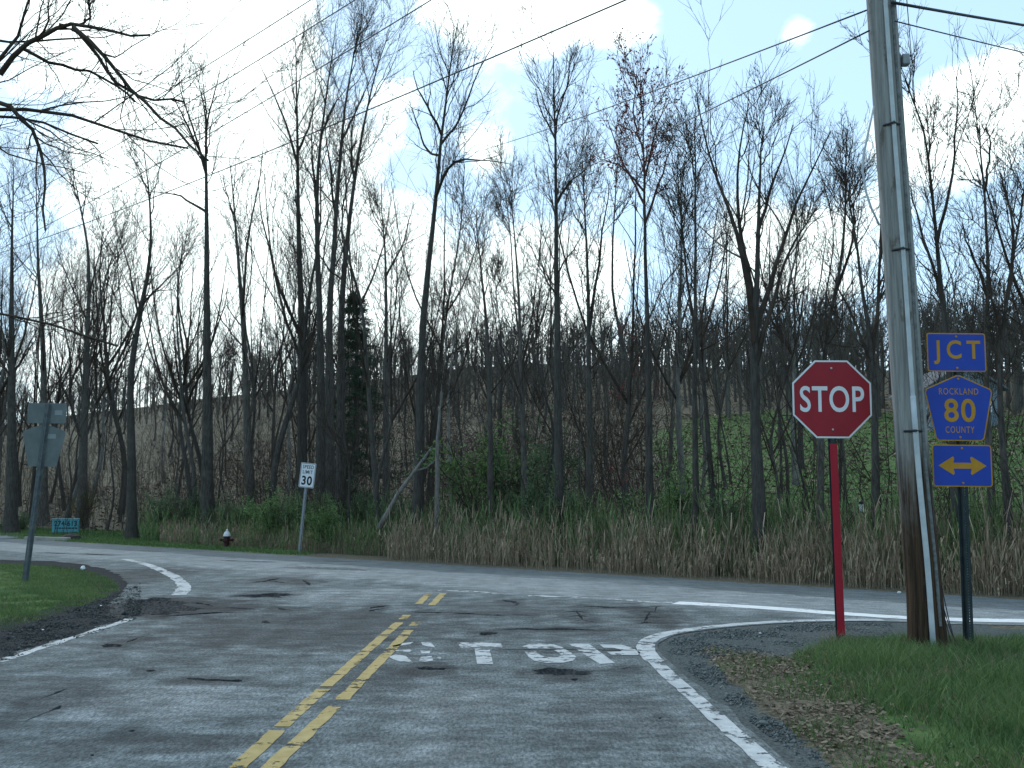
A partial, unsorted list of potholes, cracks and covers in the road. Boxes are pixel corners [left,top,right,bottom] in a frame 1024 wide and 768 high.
crack [408,600,663,630]
pothole [532,667,592,676]
crack [25,689,66,721]
pothole [120,597,210,616]
